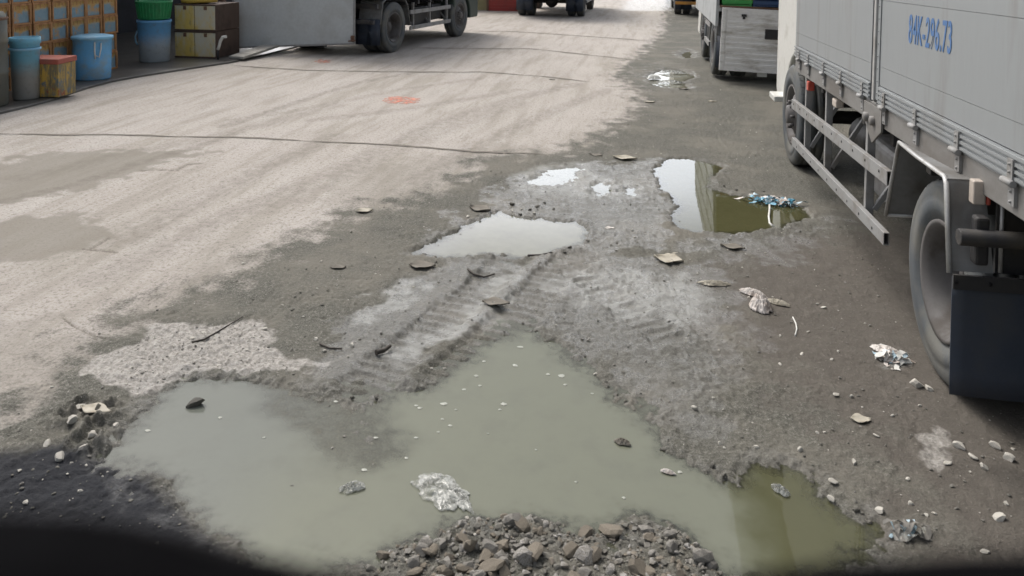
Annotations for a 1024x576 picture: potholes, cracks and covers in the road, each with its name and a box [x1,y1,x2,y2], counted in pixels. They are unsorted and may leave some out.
pothole [72,319,905,576]
pothole [514,163,592,189]
pothole [639,67,701,91]
pothole [645,155,825,238]
pothole [402,207,602,264]
